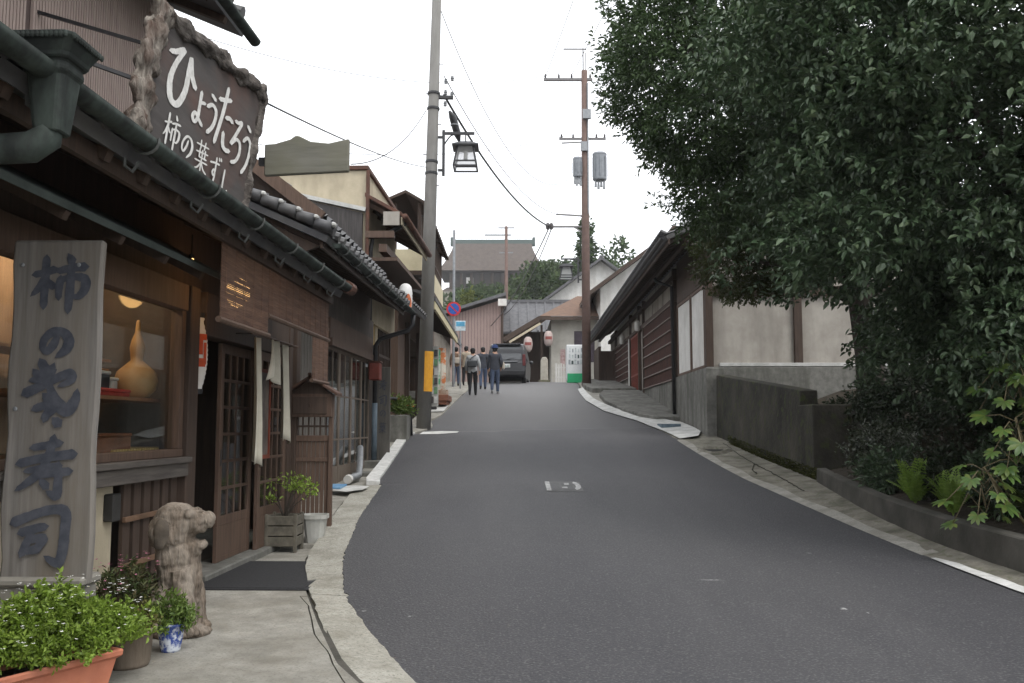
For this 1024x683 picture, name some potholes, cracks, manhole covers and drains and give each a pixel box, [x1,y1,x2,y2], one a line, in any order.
crack [723,443,805,491]
